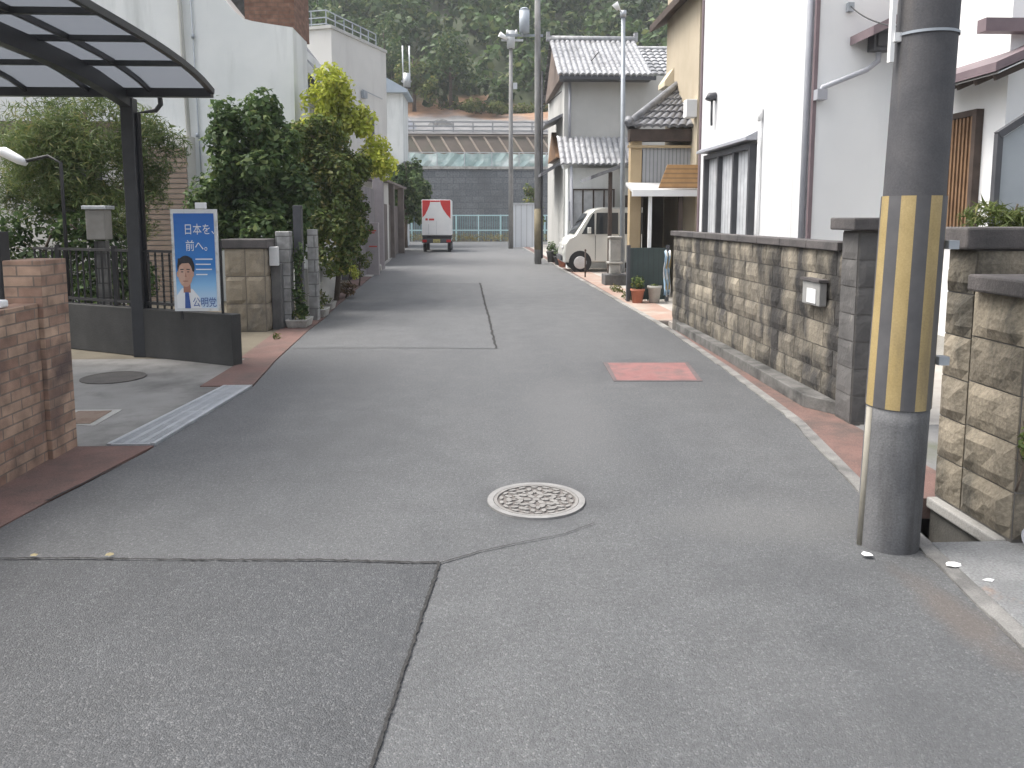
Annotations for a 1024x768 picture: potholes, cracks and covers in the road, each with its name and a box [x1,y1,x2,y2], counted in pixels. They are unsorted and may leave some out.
manhole cover [79,371,146,384]
drain grate [106,385,252,447]
manhole cover [487,482,585,520]
